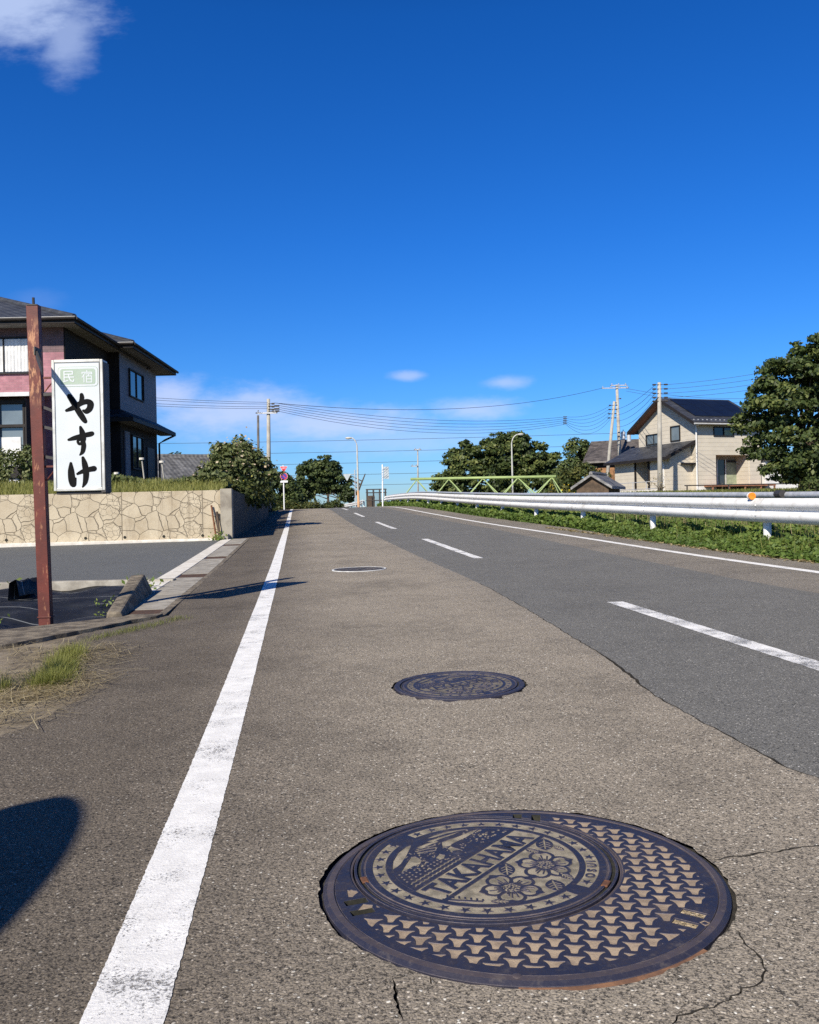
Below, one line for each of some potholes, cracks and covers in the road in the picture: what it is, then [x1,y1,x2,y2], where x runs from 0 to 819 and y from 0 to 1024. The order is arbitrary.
crack [714,845,819,867]
crack [672,924,767,1024]
manhole cover [391,671,528,702]
manhole cover [318,810,737,990]
crack [392,979,403,1019]
